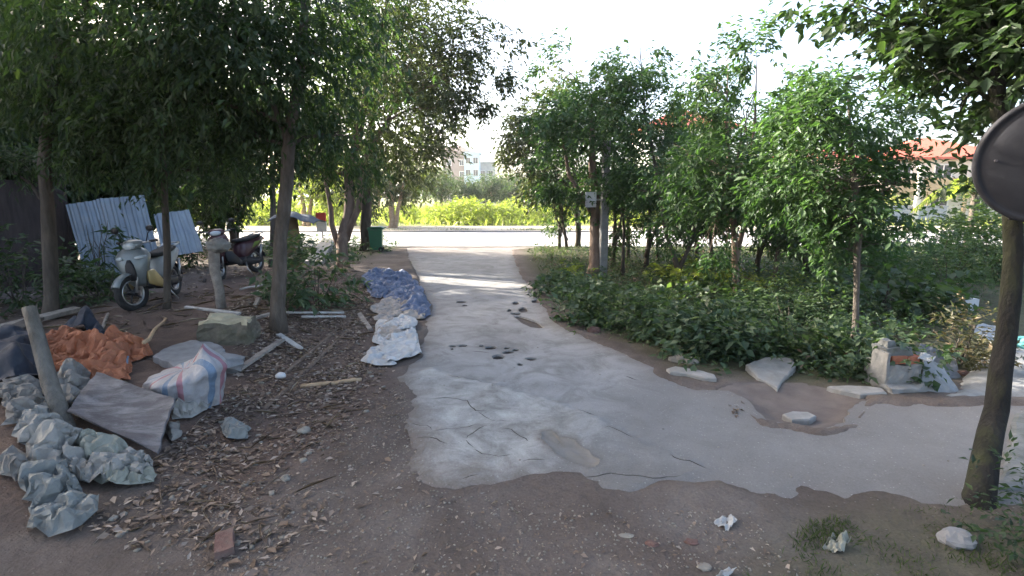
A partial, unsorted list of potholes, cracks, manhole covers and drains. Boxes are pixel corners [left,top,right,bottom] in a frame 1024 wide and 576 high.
pothole [514,316,544,328]
crack [413,397,528,480]
